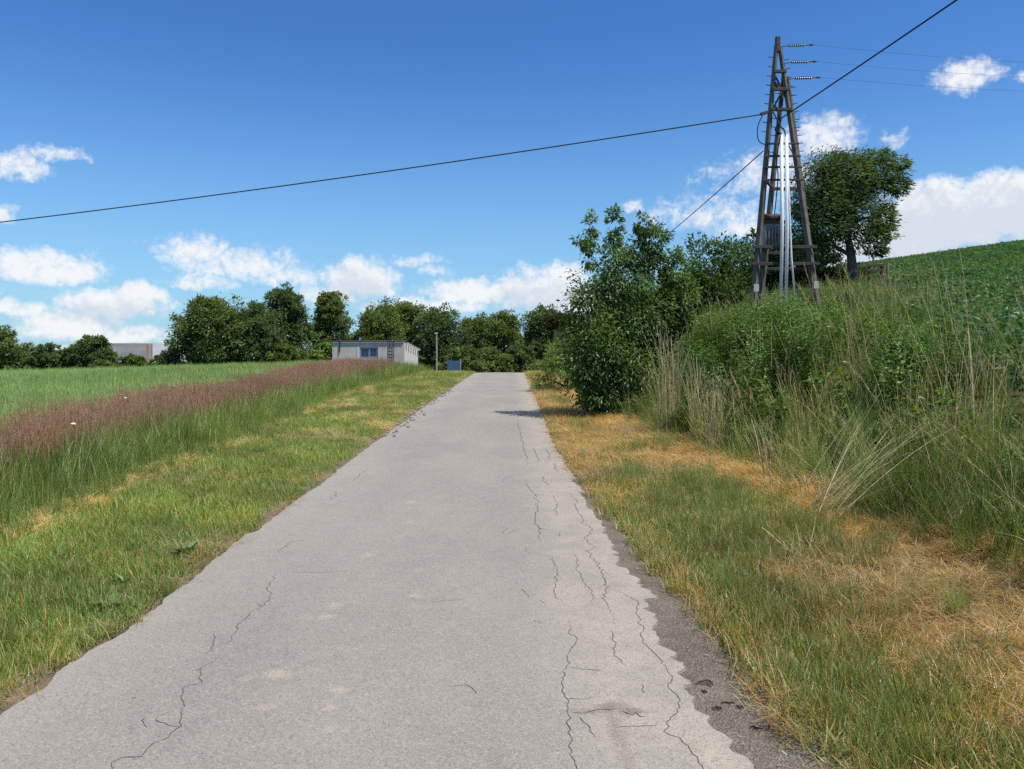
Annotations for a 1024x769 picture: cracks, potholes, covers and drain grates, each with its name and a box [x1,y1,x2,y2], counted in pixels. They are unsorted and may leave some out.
crack [517,422,704,769]
crack [111,577,274,769]
